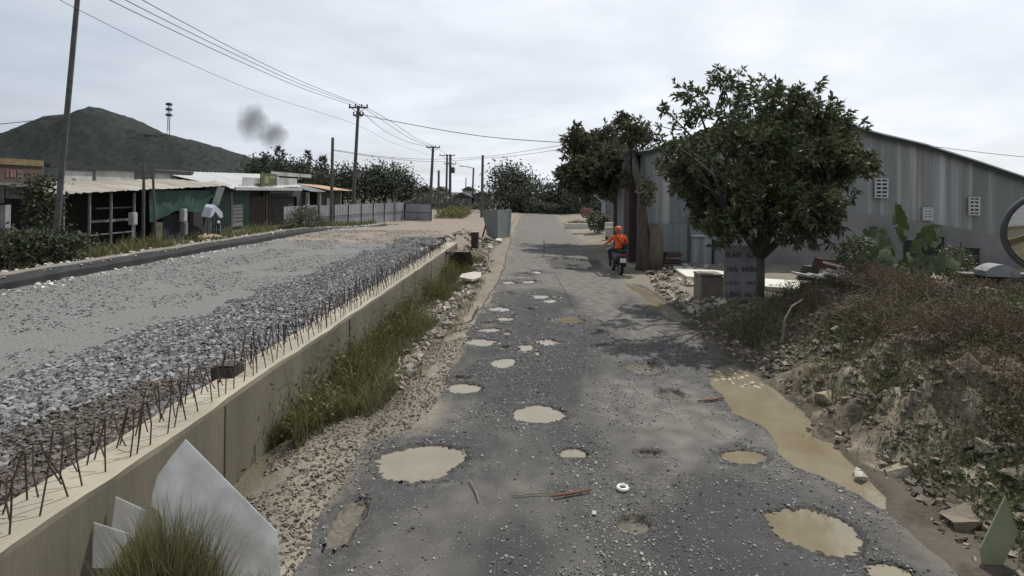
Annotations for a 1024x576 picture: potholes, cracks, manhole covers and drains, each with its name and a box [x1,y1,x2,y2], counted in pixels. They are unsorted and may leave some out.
pothole [462,337,503,348]
pothole [319,492,373,554]
pothole [858,556,923,576]
pothole [653,387,691,400]
pothole [752,501,877,564]
pothole [486,356,520,370]
pothole [515,343,540,352]
pothole [505,401,577,425]
pothole [554,445,593,460]
pothole [444,381,488,395]
pothole [607,510,659,539]
pothole [364,440,476,487]
